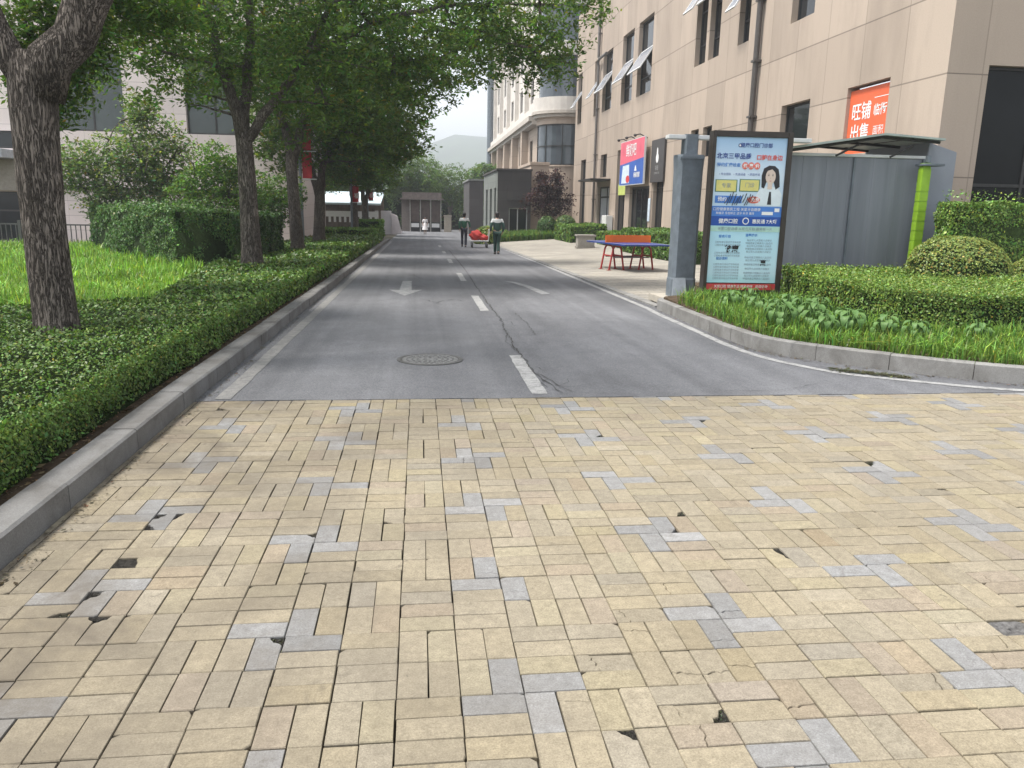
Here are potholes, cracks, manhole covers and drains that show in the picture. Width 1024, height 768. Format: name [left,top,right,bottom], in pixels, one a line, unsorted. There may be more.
pothole [112,559,137,569]
crack [423,250,588,393]
manhole cover [397,353,463,366]
pothole [988,621,1024,636]
